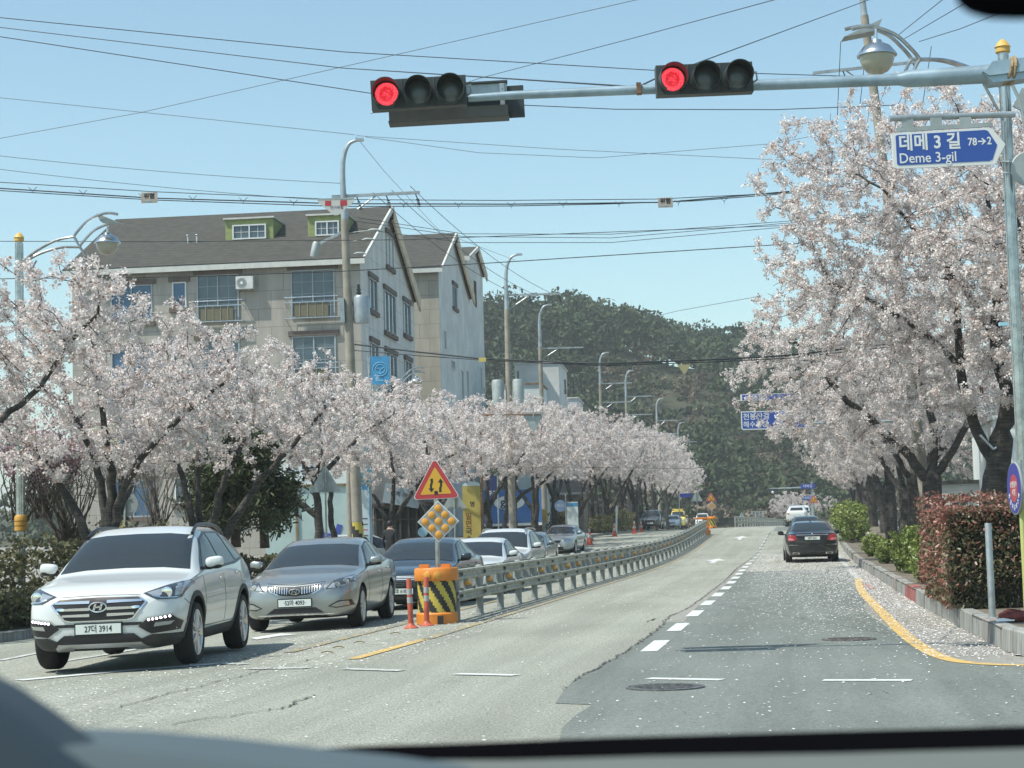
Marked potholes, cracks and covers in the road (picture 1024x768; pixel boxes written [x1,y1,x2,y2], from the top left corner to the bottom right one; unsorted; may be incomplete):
crack [170,687,330,725]
manhole cover [626,683,705,691]
